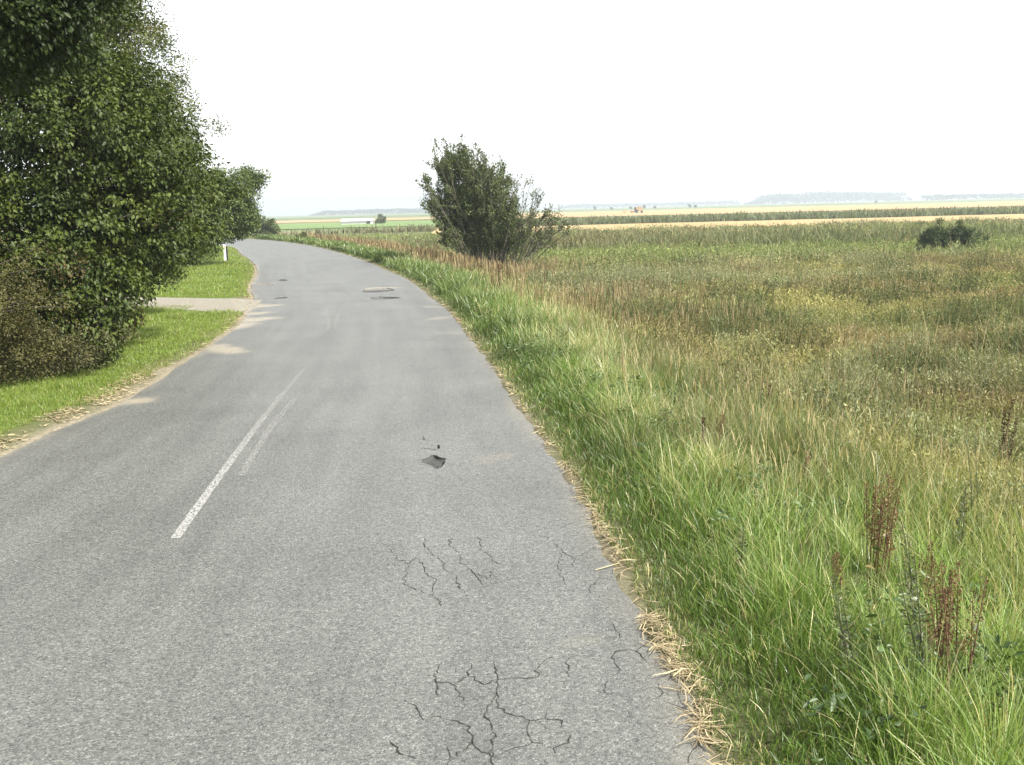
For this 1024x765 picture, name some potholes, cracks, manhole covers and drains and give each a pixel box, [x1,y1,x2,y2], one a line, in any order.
pothole [421,455,446,469]
crack [603,621,651,693]
crack [390,657,574,765]
crack [390,537,505,605]
